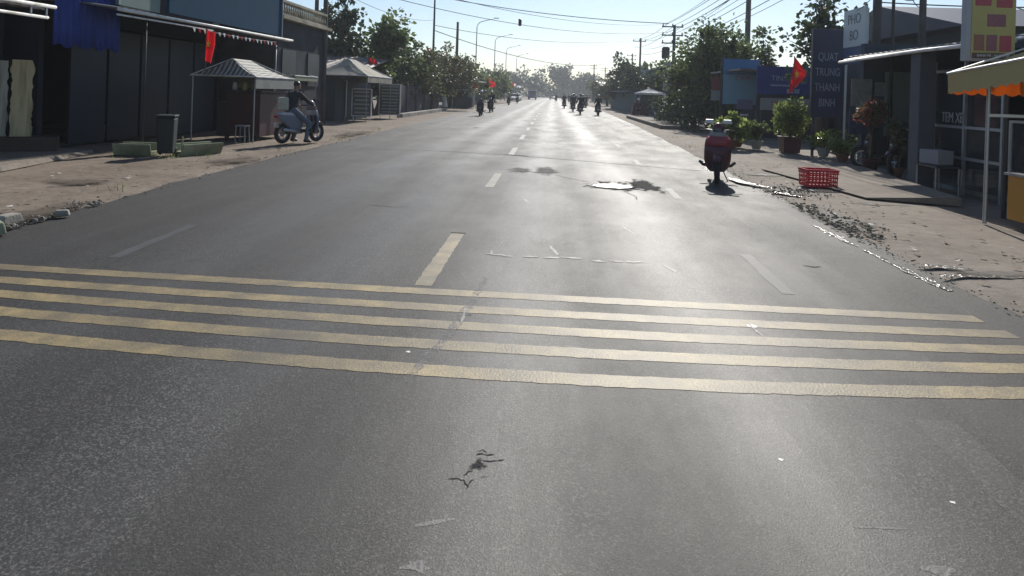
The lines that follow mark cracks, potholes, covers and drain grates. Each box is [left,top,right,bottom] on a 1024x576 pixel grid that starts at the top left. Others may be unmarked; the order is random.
pothole [630,179,665,192]
pothole [583,180,639,191]
crack [449,449,504,487]
